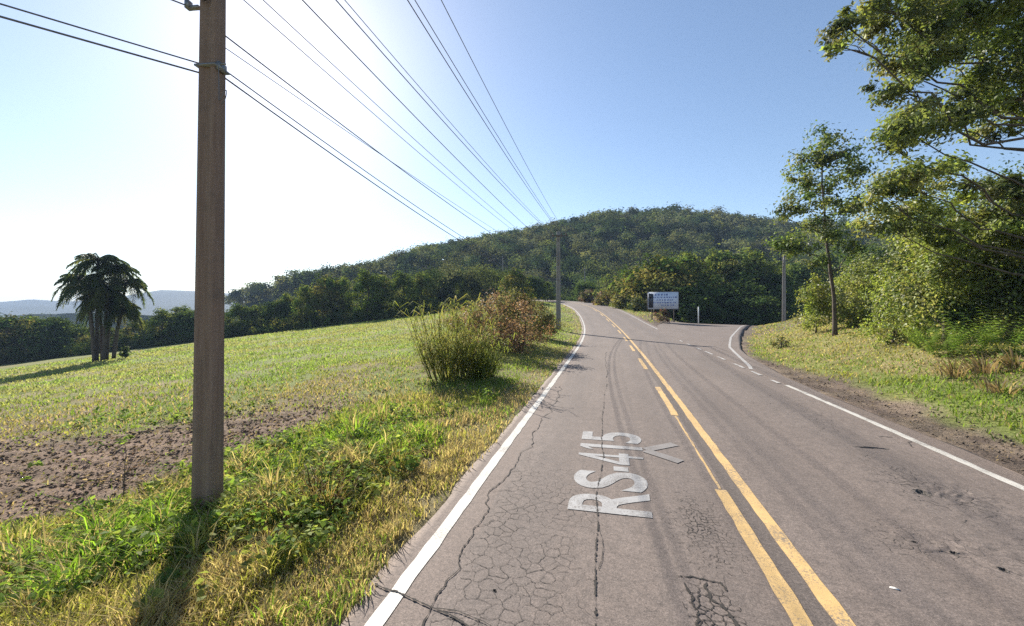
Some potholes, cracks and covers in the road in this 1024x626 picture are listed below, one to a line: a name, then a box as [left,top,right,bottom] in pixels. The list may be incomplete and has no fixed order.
crack [375,386,606,626]
crack [668,492,749,626]
